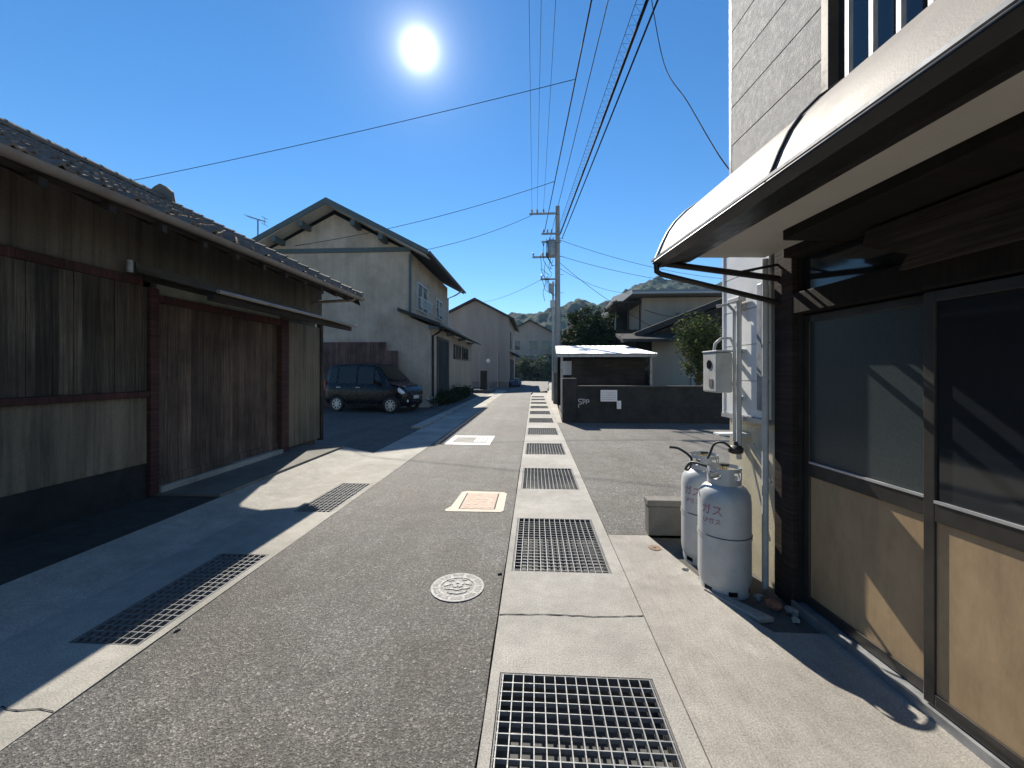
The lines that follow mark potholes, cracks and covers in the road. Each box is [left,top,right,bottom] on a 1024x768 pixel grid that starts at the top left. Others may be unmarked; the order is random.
manhole cover [444,436,495,445]
drain grate [490,673,685,768]
manhole cover [445,491,507,512]
drain grate [512,518,611,574]
drain grate [521,468,579,490]
drain grate [69,554,268,646]
manhole cover [430,573,484,602]
drain grate [294,483,371,512]
drain grate [525,443,566,455]
